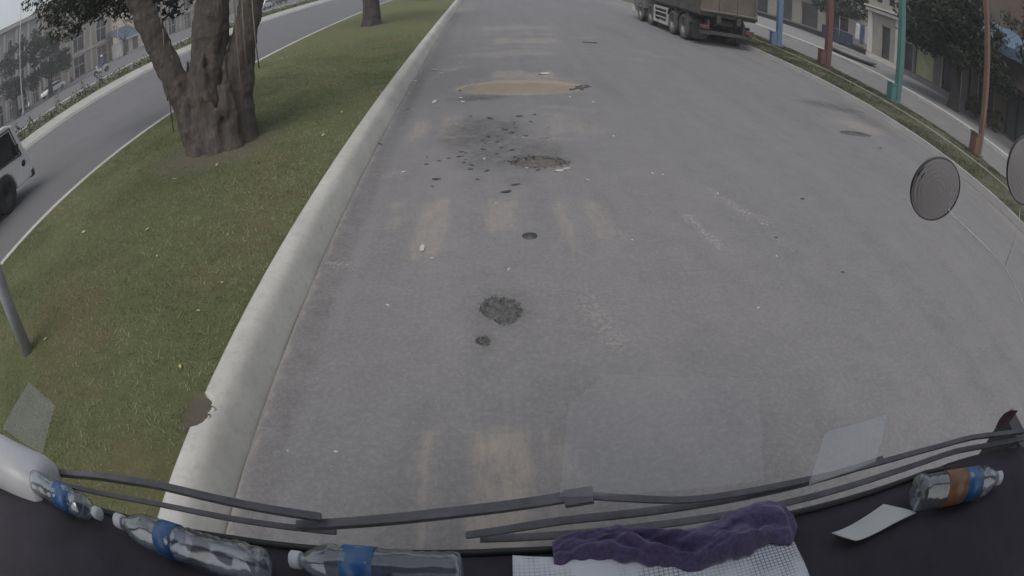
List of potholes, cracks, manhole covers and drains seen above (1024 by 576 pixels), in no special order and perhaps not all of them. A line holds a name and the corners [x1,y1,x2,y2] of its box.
pothole [475,335,491,347]
pothole [477,295,526,326]
pothole [507,155,570,168]
